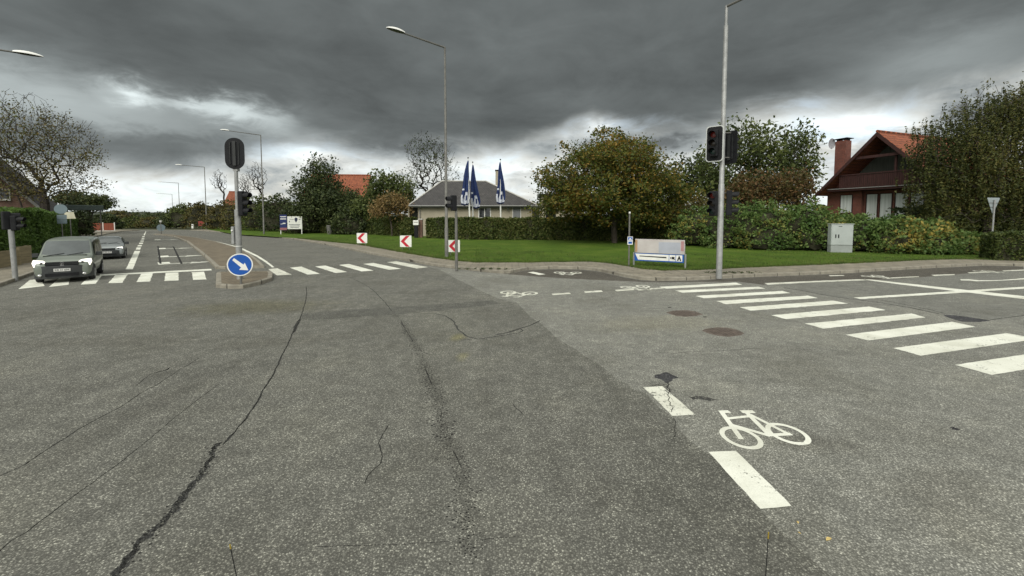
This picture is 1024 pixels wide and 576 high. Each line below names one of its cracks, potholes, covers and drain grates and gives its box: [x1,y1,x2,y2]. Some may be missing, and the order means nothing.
manhole cover [702,327,744,337]
pothole [655,372,678,383]
crack [653,377,681,446]
crack [110,277,540,576]
manhole cover [666,307,702,317]
